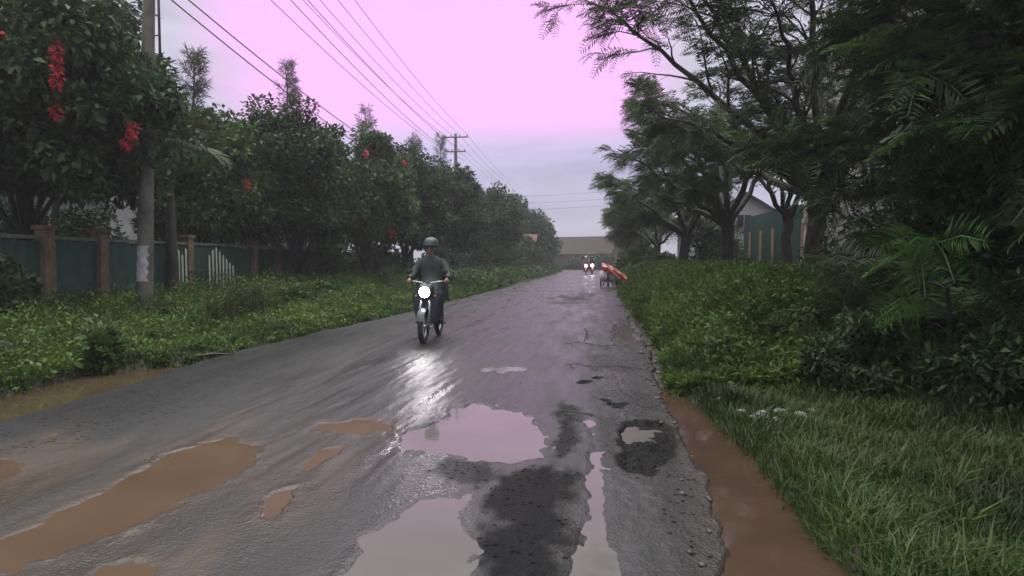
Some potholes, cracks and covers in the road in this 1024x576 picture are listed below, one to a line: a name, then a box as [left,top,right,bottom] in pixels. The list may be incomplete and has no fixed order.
pothole [612,418,683,478]
pothole [296,445,346,472]
pothole [253,483,306,521]
pothole [304,418,397,438]
pothole [0,437,268,576]
crack [566,327,631,348]
pothole [390,401,556,465]
